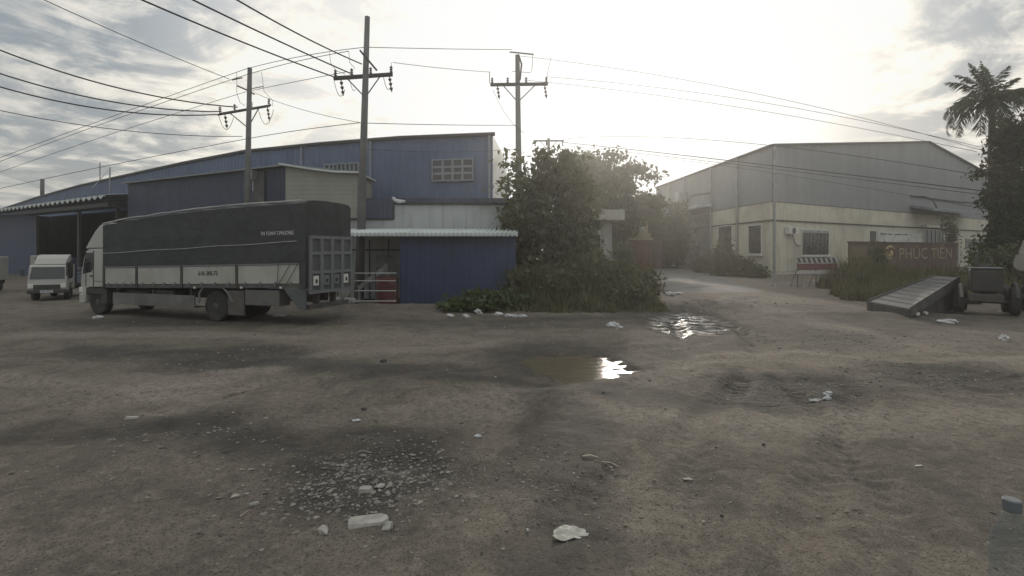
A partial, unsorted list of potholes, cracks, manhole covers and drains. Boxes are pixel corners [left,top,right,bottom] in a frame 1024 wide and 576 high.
pothole [509,351,645,385]
pothole [634,310,754,343]
pothole [694,372,900,412]
